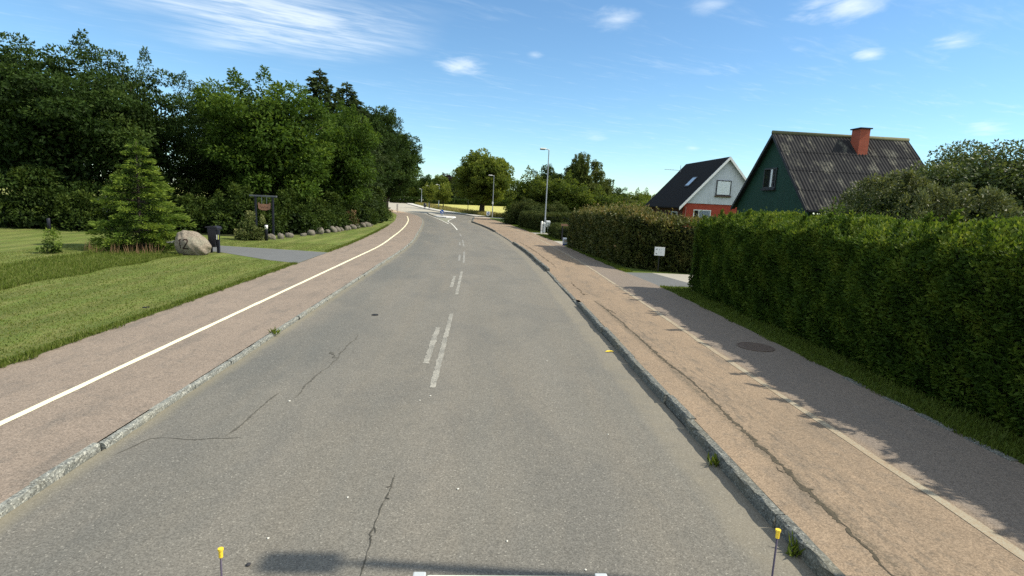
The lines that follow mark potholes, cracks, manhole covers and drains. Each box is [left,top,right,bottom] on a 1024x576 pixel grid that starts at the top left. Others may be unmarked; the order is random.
manhole cover [736,342,775,352]
crack [113,334,359,456]
crack [360,476,395,576]
